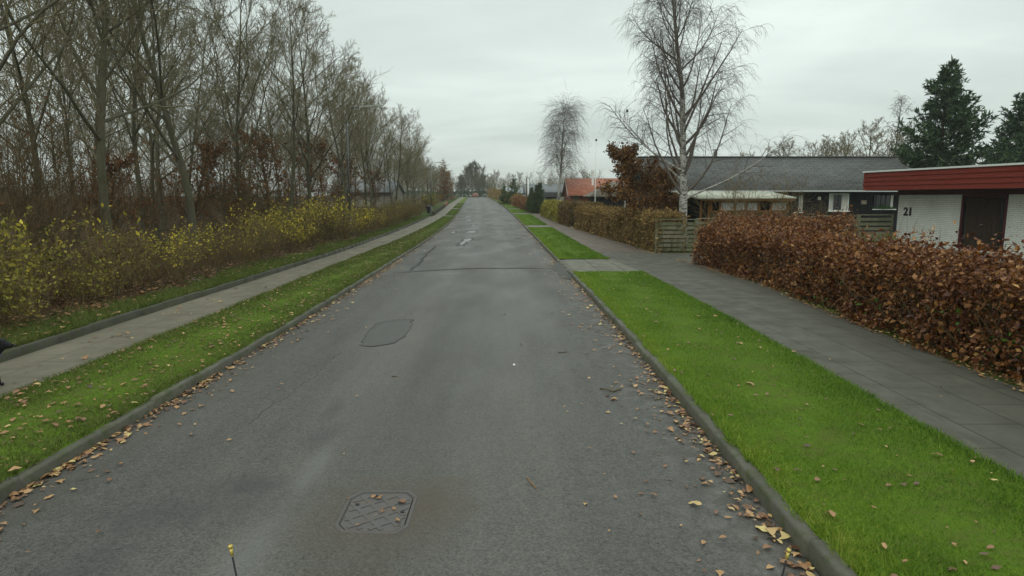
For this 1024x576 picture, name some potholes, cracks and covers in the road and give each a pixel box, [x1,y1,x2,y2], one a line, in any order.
crack [394,246,552,274]
manhole cover [333,490,418,534]
